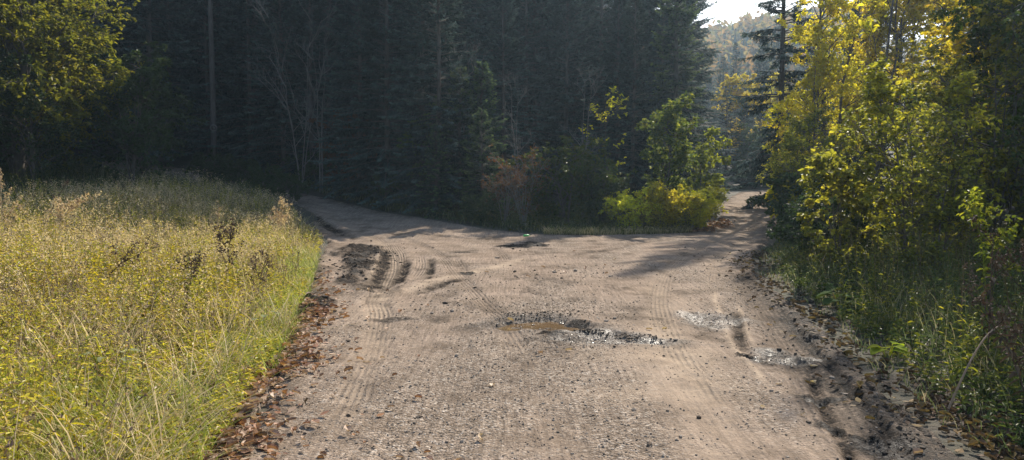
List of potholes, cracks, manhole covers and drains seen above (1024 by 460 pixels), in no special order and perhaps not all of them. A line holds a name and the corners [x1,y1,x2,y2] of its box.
pothole [755,348,818,366]
pothole [679,312,749,329]
pothole [541,329,681,346]
pothole [470,313,608,332]
